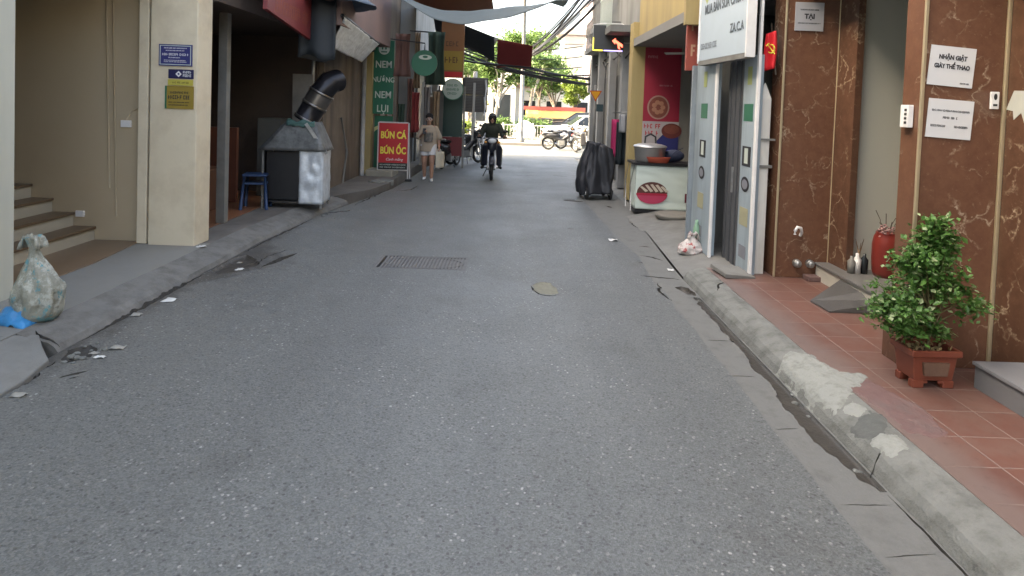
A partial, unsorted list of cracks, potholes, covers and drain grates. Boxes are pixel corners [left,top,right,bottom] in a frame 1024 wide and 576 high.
crack [24,362,86,385]
pothole [61,345,97,363]
